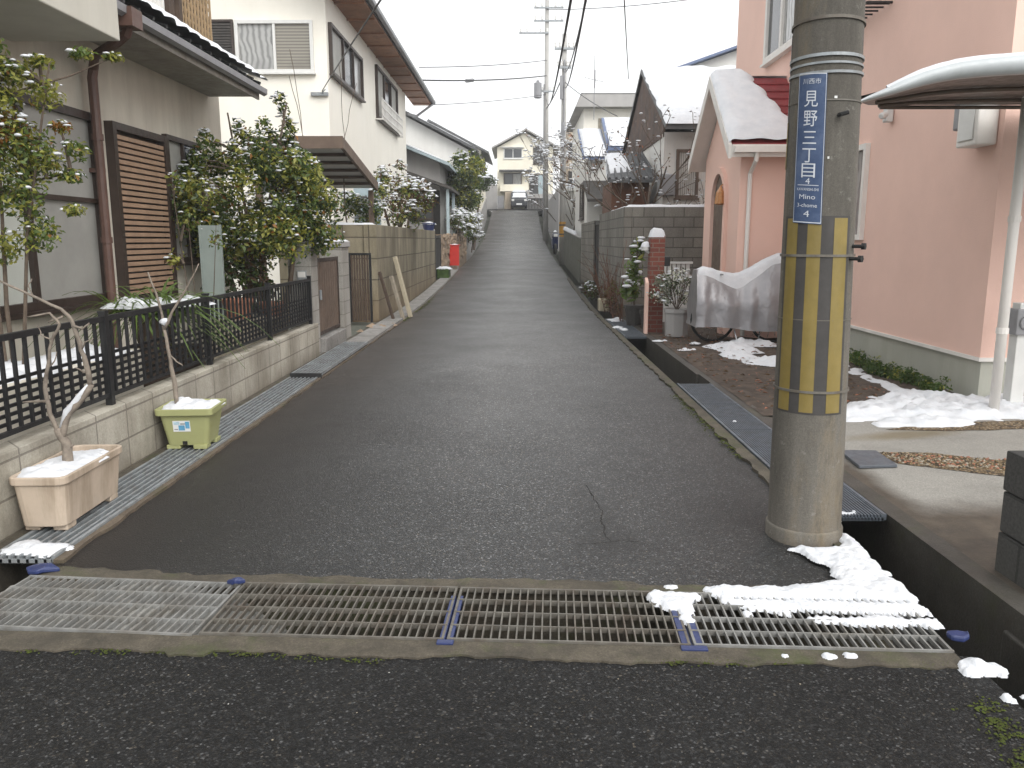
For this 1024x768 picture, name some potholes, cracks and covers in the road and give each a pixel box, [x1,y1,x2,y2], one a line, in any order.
drain grate [199,582,458,641]
drain grate [671,610,708,652]
drain grate [220,398,287,426]
drain grate [699,404,772,431]
crack [582,486,638,544]
drain grate [677,383,738,405]
drain grate [436,596,464,645]
drain grate [292,355,347,375]
drain grate [255,377,318,400]
